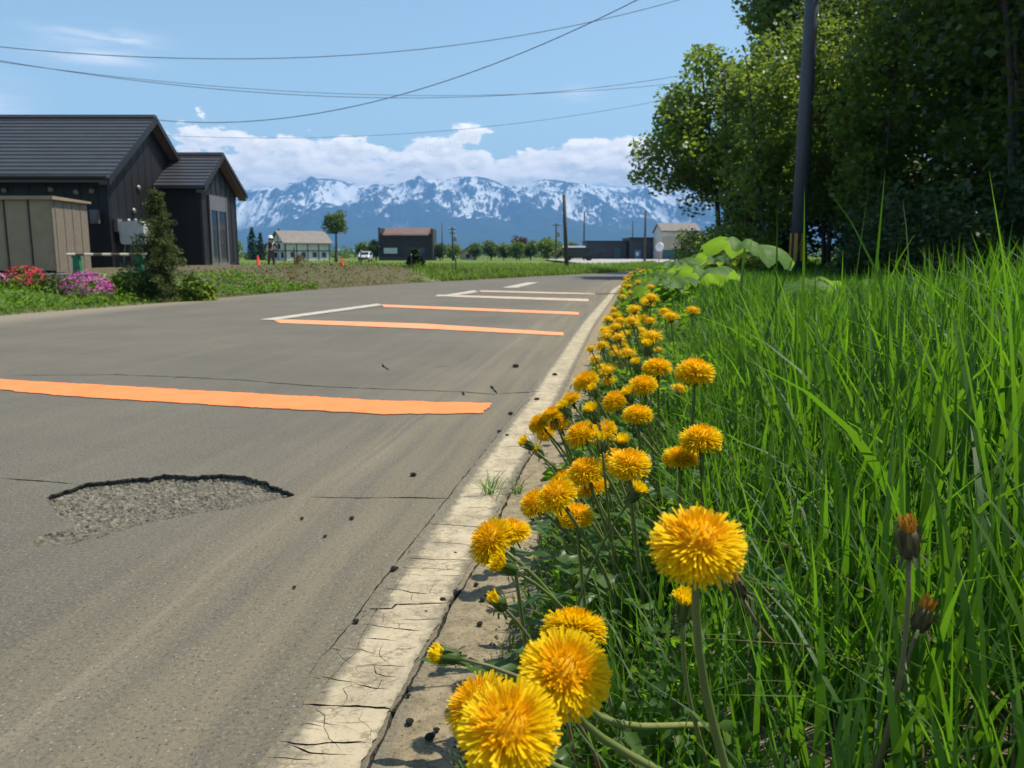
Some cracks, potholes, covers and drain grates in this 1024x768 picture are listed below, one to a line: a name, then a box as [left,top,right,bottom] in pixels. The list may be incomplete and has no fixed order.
pothole [28,474,295,548]
crack [31,374,530,396]
crack [287,385,572,768]
